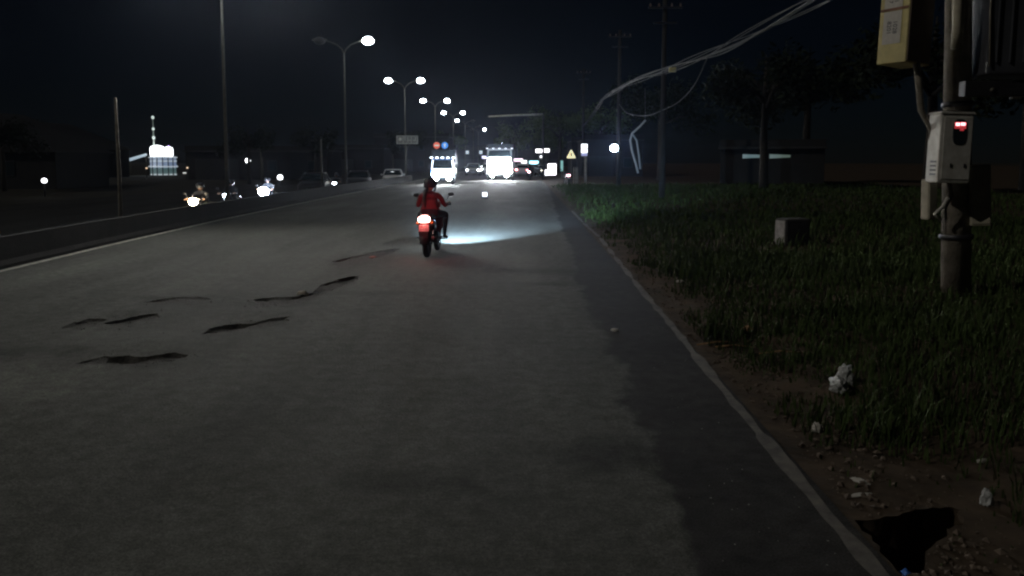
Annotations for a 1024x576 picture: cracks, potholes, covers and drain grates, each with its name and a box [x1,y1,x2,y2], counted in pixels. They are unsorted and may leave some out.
pothole [75,352,188,366]
pothole [104,313,160,325]
pothole [61,318,109,329]
pothole [199,317,290,335]
pothole [332,248,401,268]
pothole [253,276,359,307]
